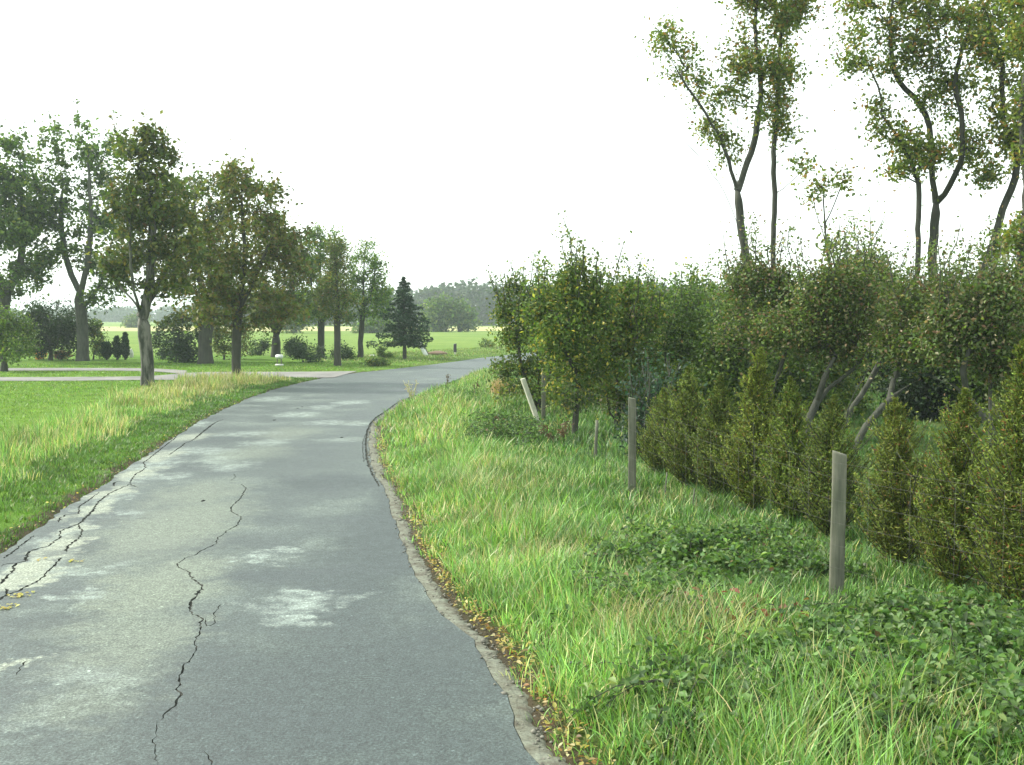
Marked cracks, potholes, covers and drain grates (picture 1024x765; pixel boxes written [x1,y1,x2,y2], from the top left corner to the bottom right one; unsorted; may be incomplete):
crack [0,420,221,600]
crack [152,474,247,762]
